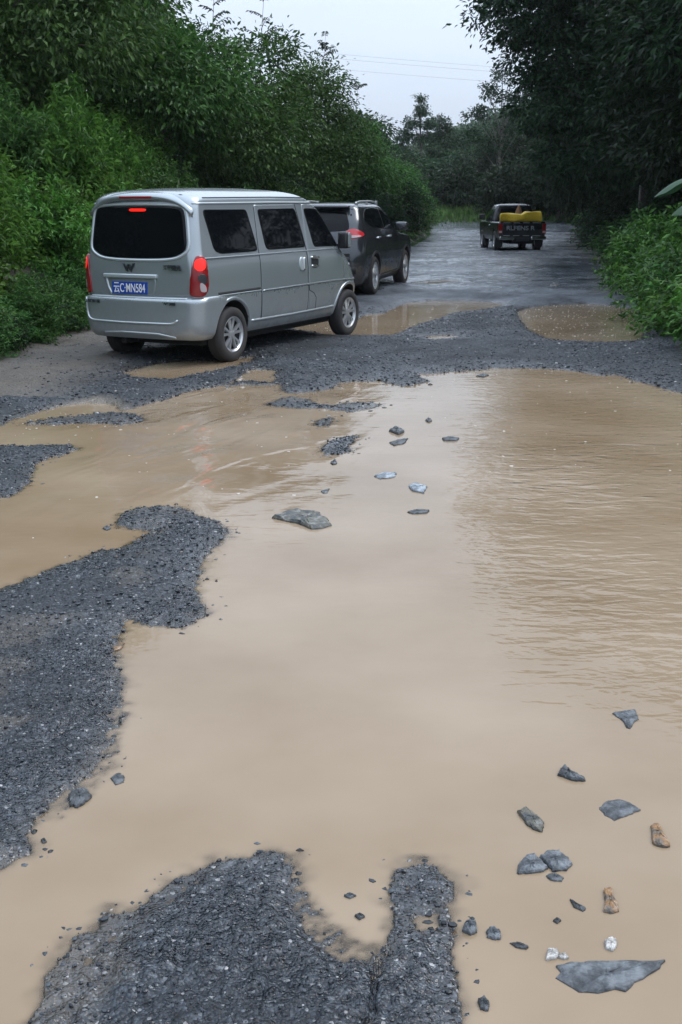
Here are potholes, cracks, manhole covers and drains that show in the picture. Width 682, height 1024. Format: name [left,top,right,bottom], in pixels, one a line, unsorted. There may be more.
pothole [0,366,682,1024]
pothole [122,355,256,377]
pothole [358,299,507,335]
pothole [515,302,647,340]
